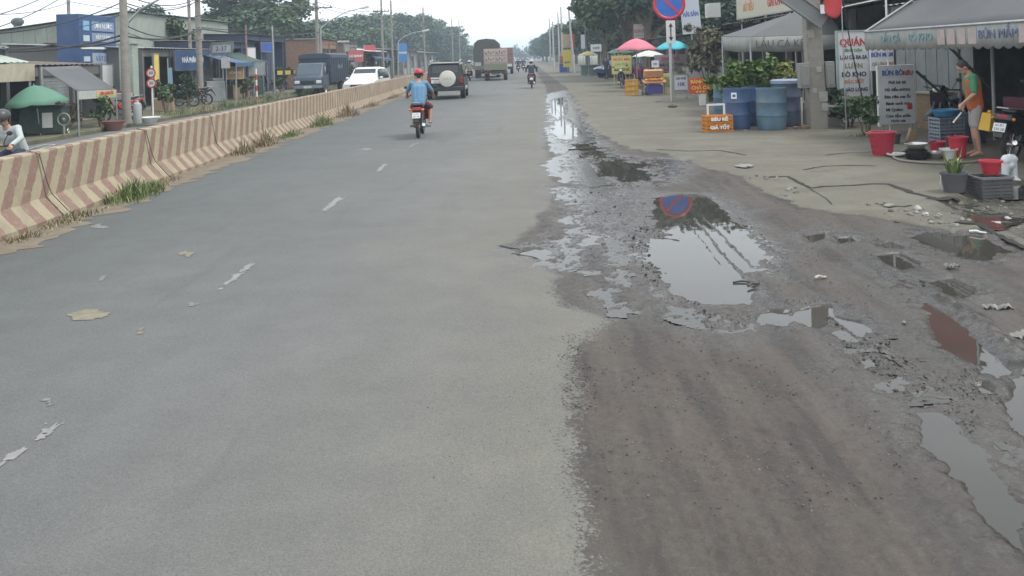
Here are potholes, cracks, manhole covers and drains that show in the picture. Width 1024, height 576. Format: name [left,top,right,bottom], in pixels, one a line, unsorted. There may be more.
pothole [902,287,1022,384]
pothole [565,232,613,249]
pothole [547,118,582,142]
pothole [741,303,807,332]
pothole [895,227,1024,263]
pothole [817,313,891,349]
pothole [588,159,666,183]
pothole [893,403,1024,571]
pothole [567,141,615,160]
pothole [626,192,777,310]
pothole [547,97,568,120]
